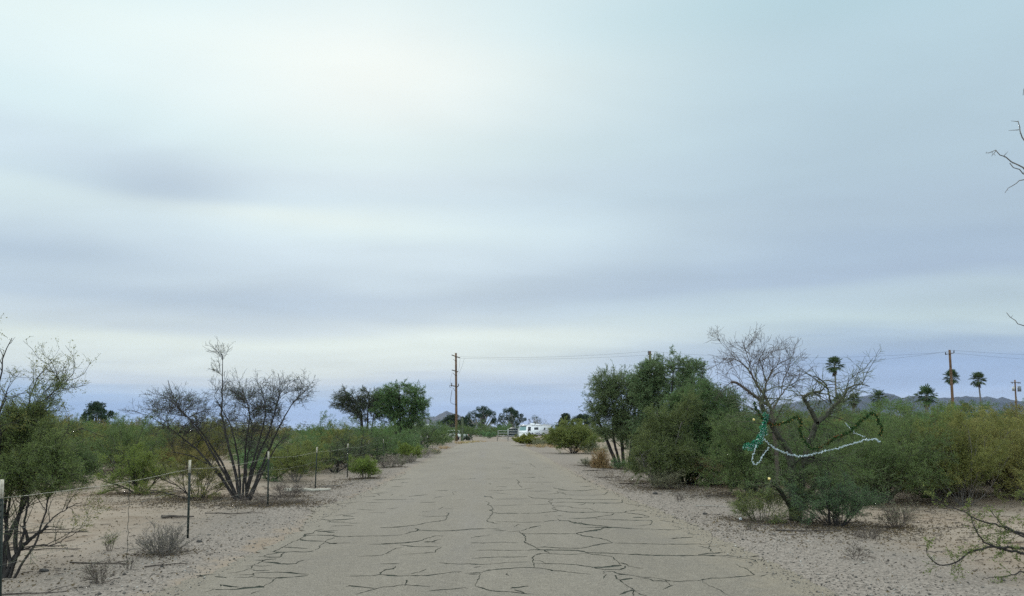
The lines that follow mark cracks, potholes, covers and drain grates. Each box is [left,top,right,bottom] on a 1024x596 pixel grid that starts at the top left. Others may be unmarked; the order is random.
crack [445,460,758,596]
crack [196,479,505,595]
